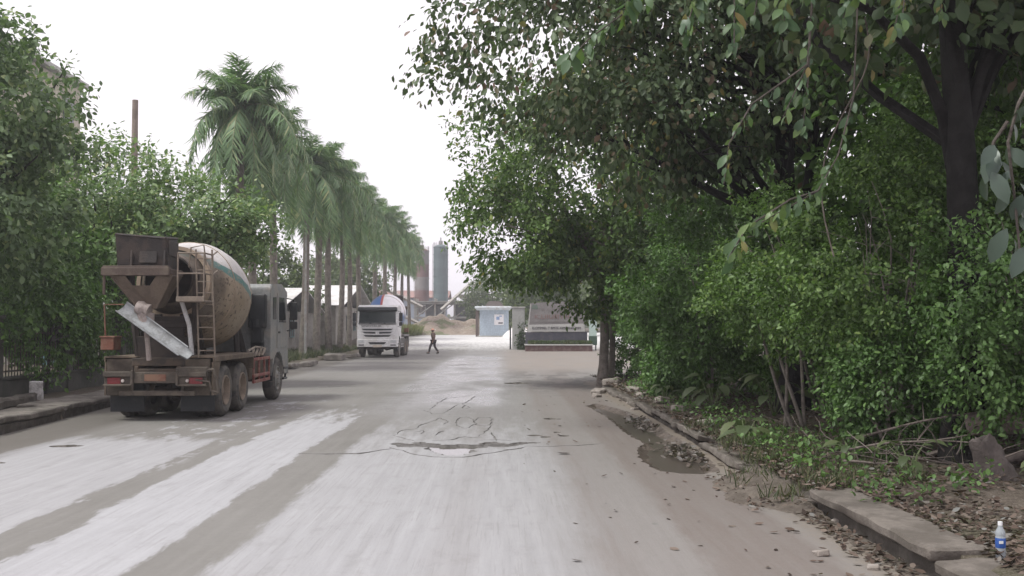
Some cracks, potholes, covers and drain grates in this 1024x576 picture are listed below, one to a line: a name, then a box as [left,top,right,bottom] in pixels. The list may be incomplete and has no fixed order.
crack [299,395,497,454]
pothole [587,404,720,474]
